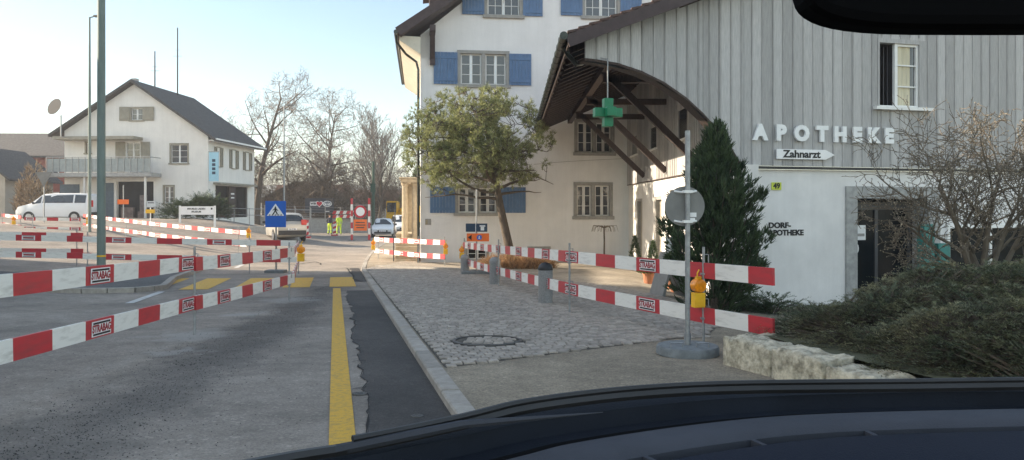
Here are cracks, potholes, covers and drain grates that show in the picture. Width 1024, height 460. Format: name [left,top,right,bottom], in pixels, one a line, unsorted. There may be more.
manhole cover [452,335,522,347]
